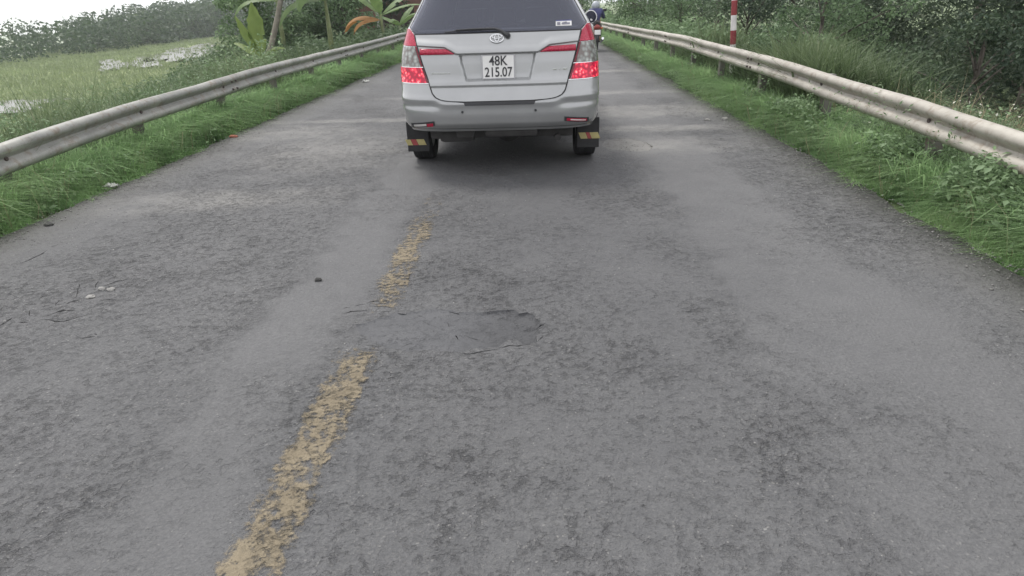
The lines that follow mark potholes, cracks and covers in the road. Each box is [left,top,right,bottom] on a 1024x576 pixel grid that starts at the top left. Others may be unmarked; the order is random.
pothole [355,309,544,352]
